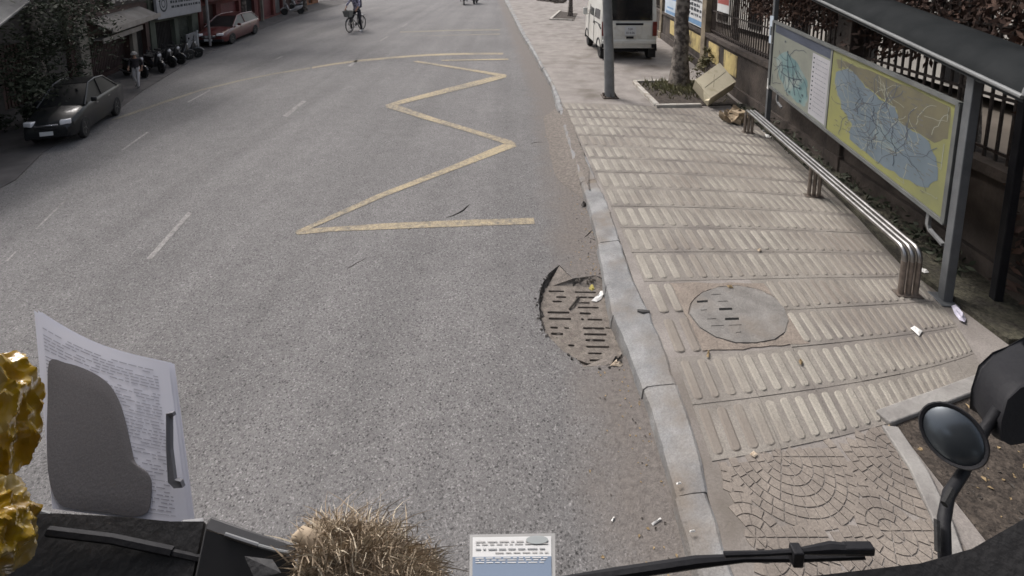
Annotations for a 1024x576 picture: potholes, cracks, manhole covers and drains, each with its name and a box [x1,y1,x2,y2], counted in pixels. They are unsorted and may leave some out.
manhole cover [670,282,809,351]
drain grate [541,282,622,365]
